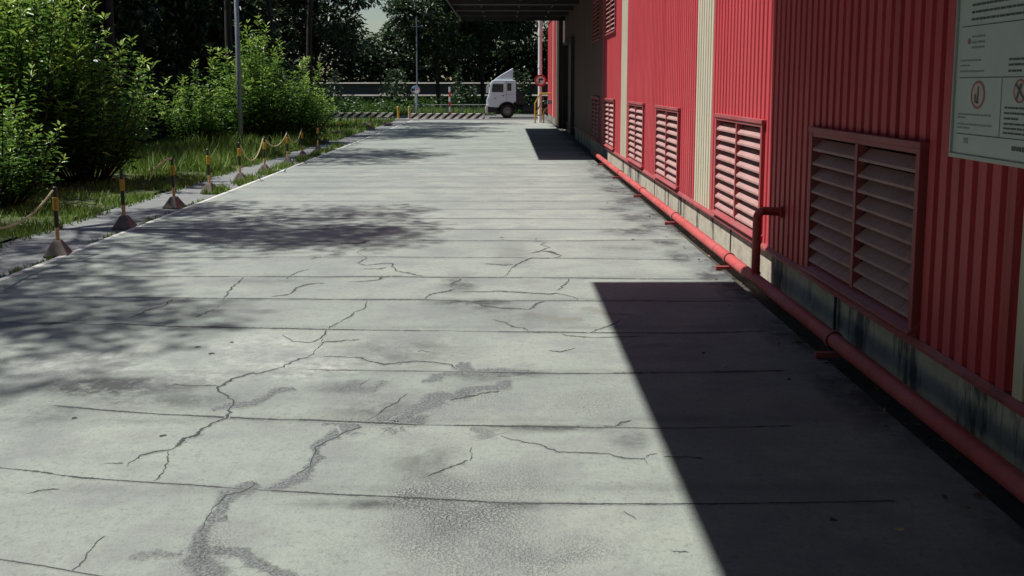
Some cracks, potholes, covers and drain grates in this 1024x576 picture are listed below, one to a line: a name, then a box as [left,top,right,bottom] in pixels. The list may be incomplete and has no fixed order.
crack [270,238,578,331]
crack [112,301,705,576]
